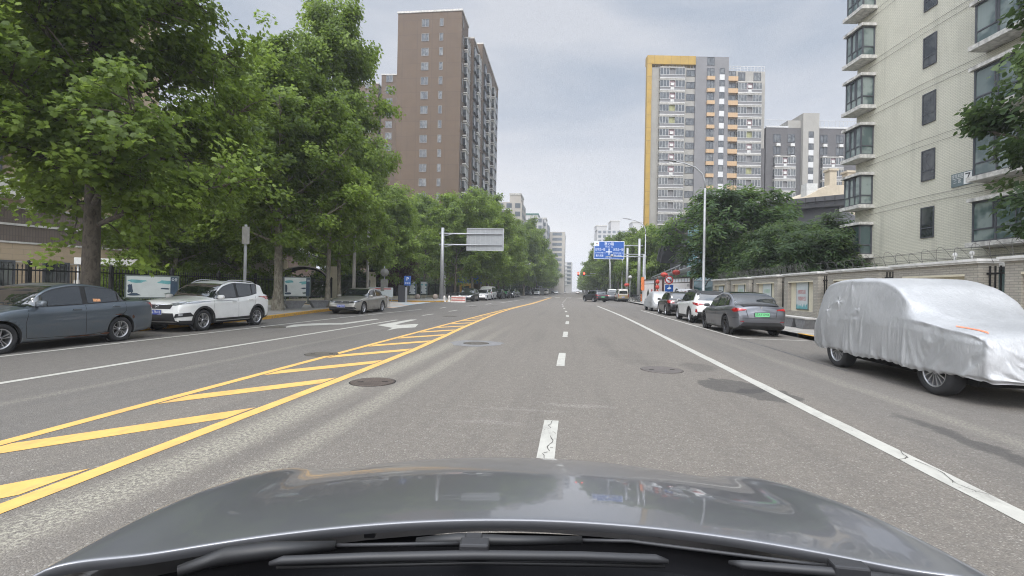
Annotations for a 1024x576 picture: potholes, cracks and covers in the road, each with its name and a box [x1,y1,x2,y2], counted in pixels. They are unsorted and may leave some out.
manhole cover [640,366,684,374]
manhole cover [349,377,396,387]
